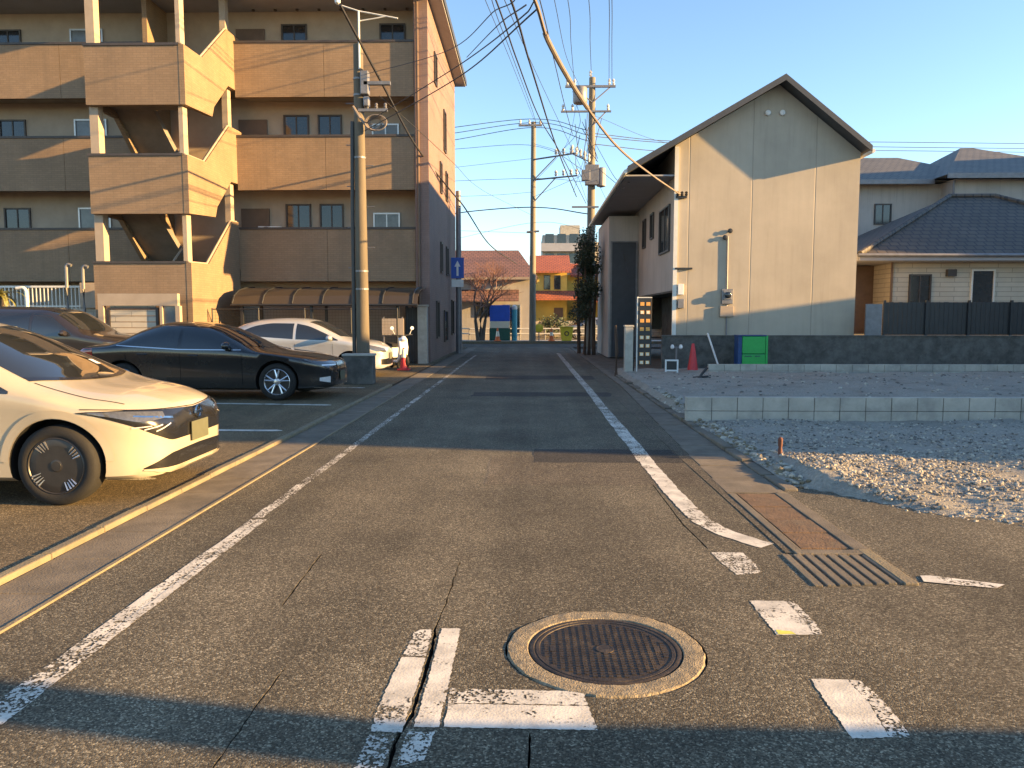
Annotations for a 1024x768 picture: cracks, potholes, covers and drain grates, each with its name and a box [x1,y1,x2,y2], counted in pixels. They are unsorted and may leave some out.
crack [388,582,454,768]
manhole cover [507,611,706,699]
